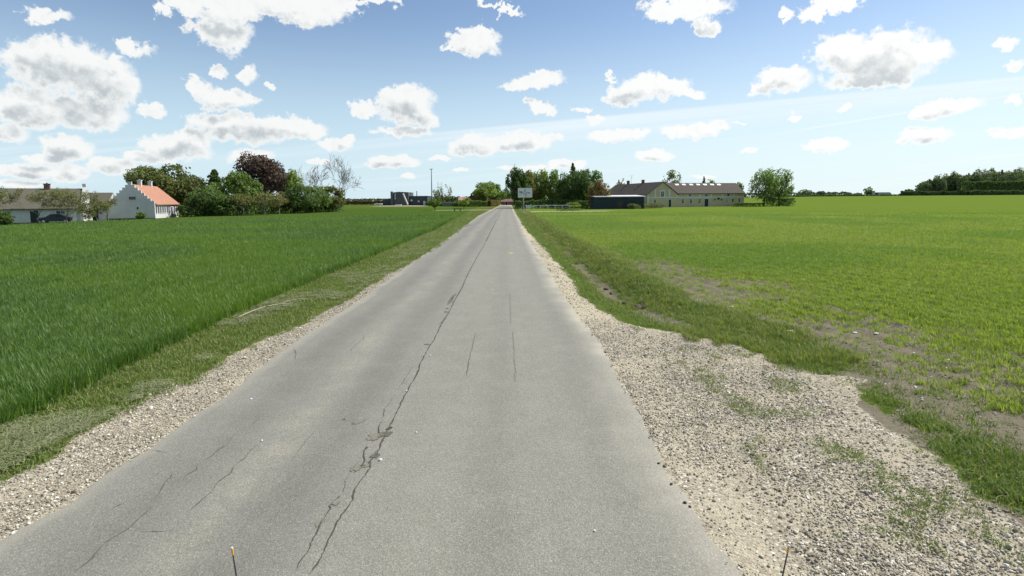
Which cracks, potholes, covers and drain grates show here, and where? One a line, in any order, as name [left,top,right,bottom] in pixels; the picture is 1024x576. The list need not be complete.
crack [296,370,410,570]
crack [77,439,254,570]
